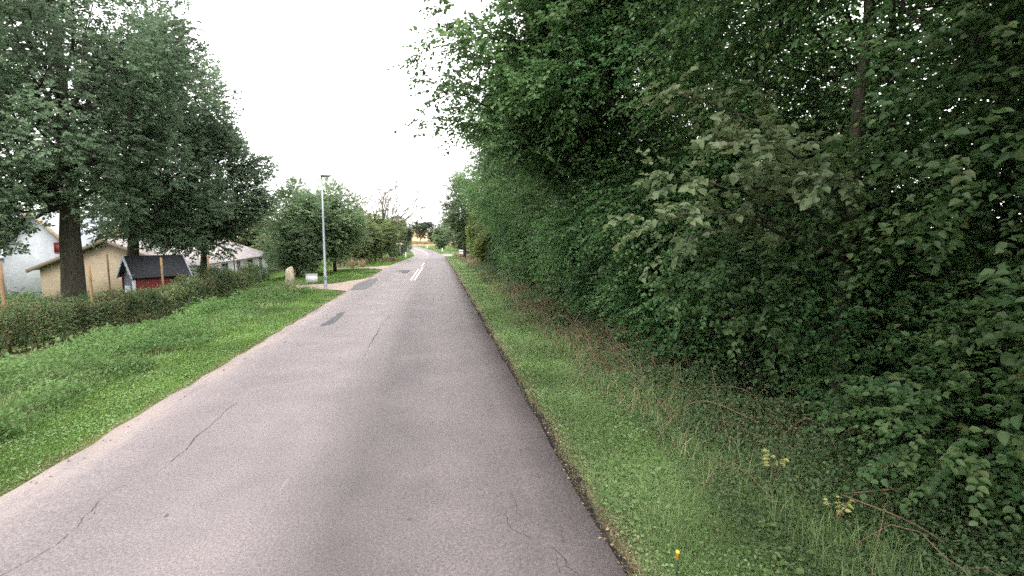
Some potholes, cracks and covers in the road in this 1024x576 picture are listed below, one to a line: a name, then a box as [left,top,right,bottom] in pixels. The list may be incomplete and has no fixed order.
crack [0,406,232,576]
